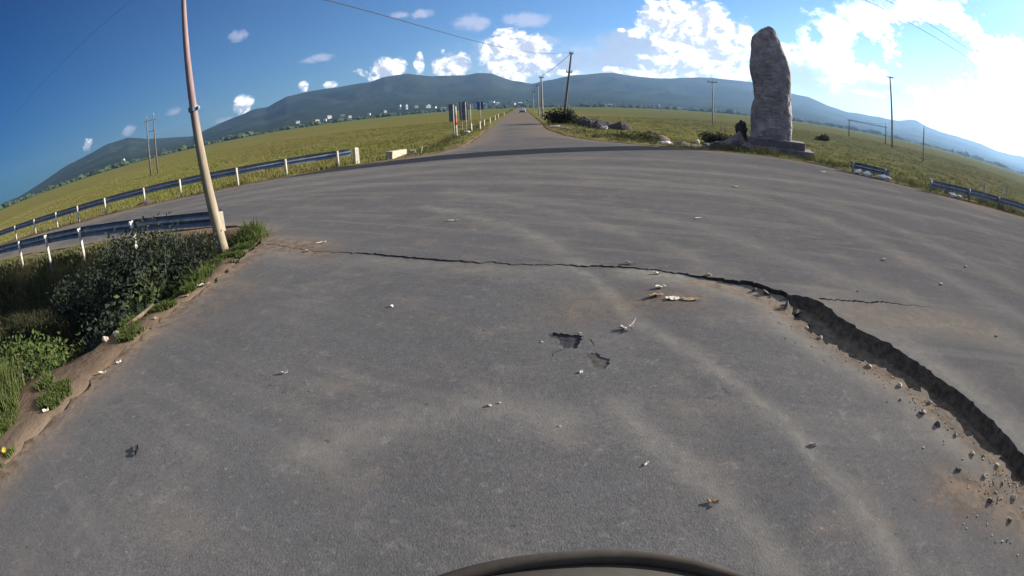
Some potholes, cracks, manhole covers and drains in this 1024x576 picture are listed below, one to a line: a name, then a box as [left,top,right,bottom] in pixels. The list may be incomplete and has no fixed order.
pothole [548,332,583,349]
crack [819,298,921,307]
pothole [587,353,610,369]
crack [261,243,787,298]
